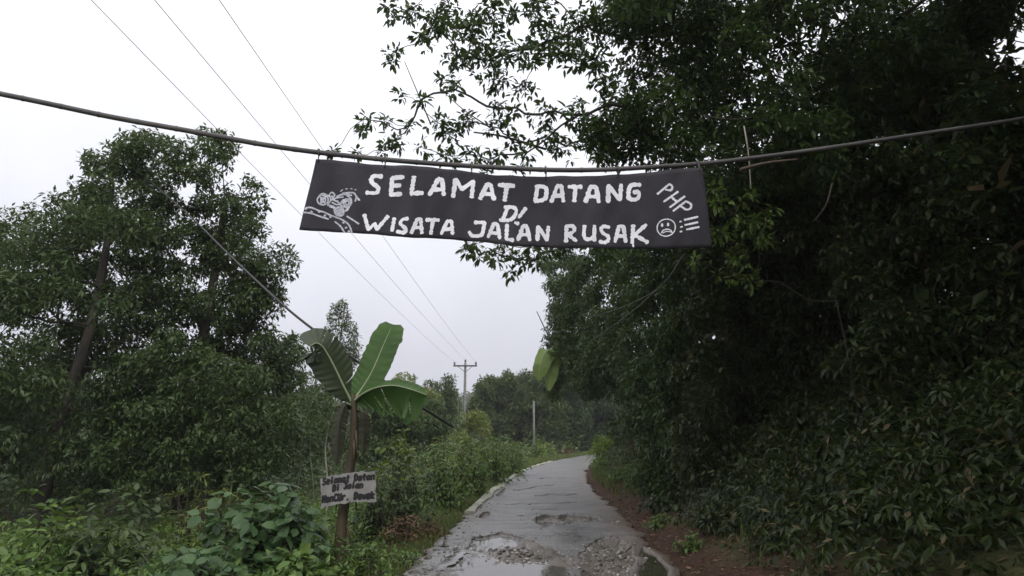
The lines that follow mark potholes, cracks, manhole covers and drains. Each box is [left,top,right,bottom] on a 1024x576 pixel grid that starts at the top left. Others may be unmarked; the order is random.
pothole [629,545,680,576]
pothole [532,514,603,528]
pothole [574,536,647,576]
pothole [433,531,582,576]
crack [499,478,580,516]
